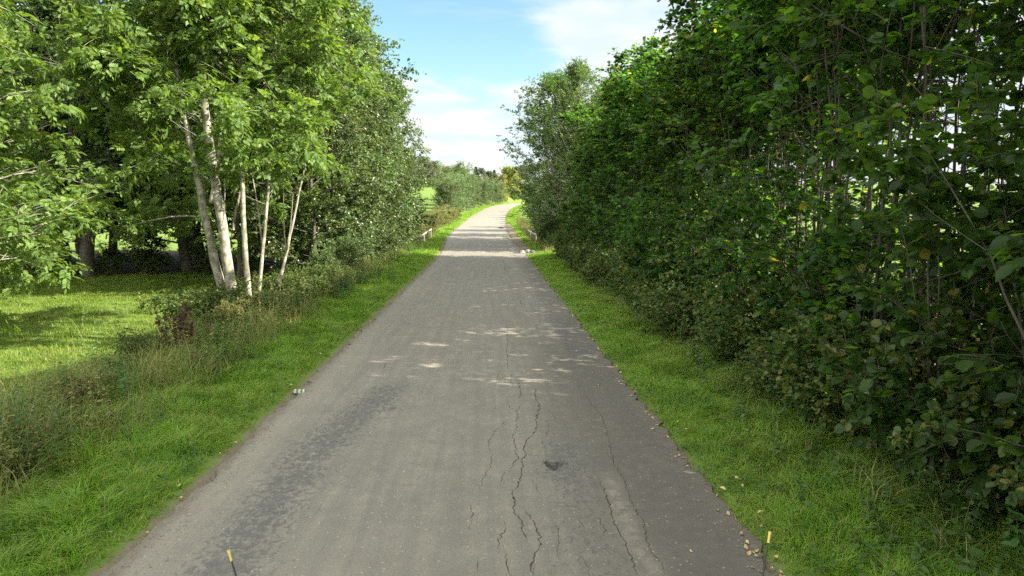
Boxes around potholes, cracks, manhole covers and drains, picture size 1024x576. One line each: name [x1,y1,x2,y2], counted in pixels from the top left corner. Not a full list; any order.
crack [470,327,560,575]
pothole [544,461,568,471]
